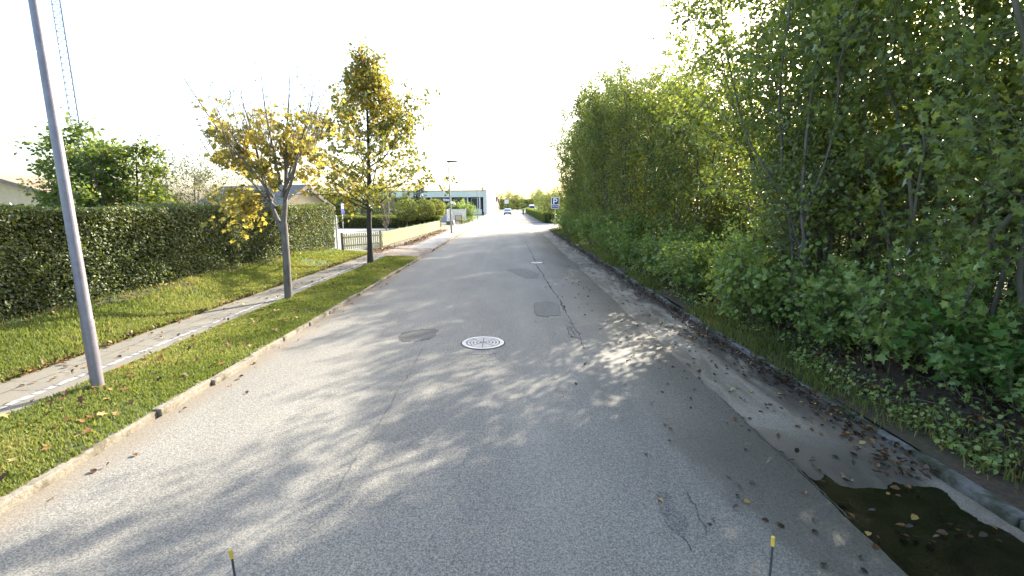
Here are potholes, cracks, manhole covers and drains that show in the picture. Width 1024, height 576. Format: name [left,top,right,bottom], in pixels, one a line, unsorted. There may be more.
crack [525,242,584,348]
manhole cover [461,336,505,350]
crack [684,489,715,552]
